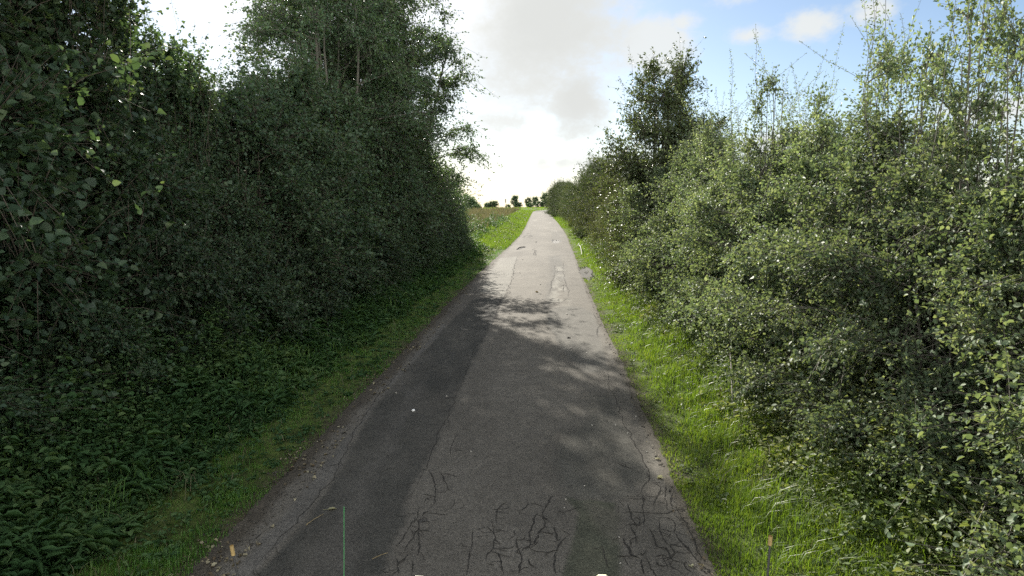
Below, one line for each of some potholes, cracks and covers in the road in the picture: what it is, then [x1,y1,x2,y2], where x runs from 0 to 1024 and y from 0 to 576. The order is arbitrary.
crack [466,496,578,574]
crack [592,374,729,576]
crack [381,470,464,576]
